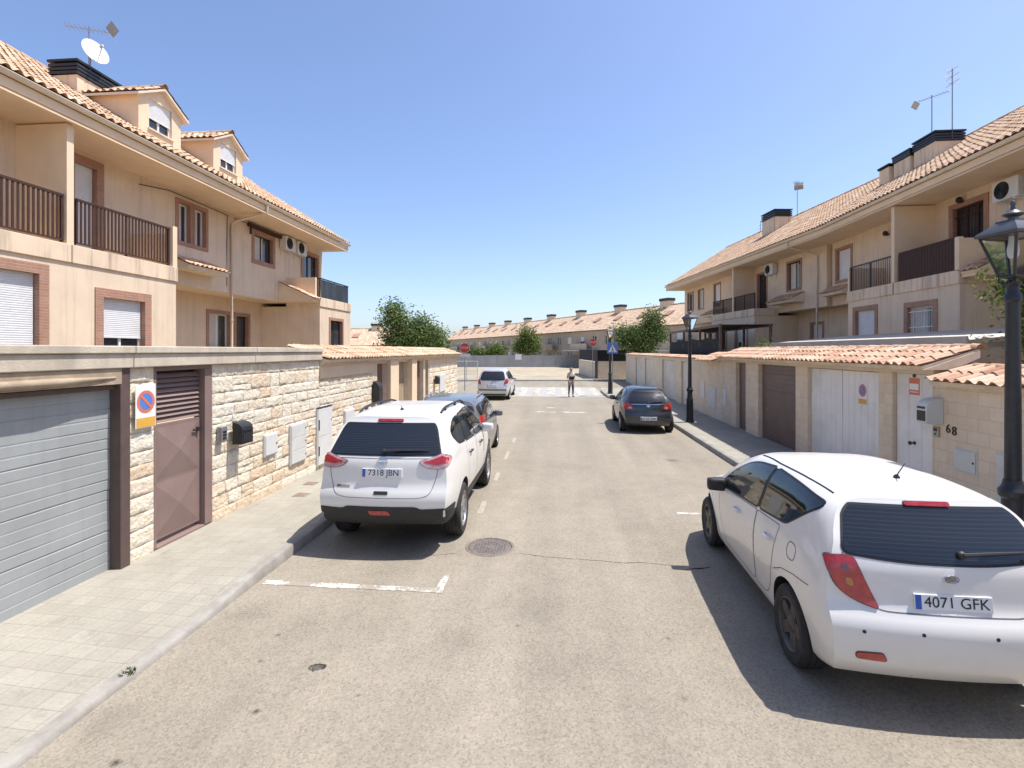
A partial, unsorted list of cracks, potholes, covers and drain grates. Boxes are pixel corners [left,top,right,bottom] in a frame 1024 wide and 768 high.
manhole cover [465,537,515,557]
crack [521,553,710,570]
